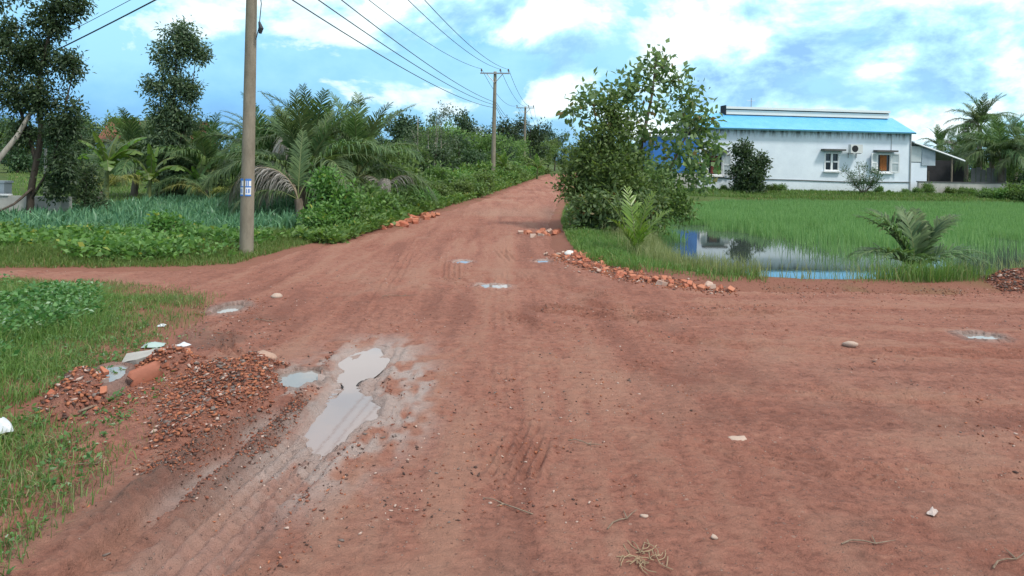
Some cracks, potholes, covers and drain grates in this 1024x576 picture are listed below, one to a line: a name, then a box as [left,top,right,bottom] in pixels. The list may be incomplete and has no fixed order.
pothole [273,365,339,392]
pothole [469,282,516,290]
pothole [205,300,254,316]
pothole [287,345,399,467]
pothole [947,330,1014,343]
